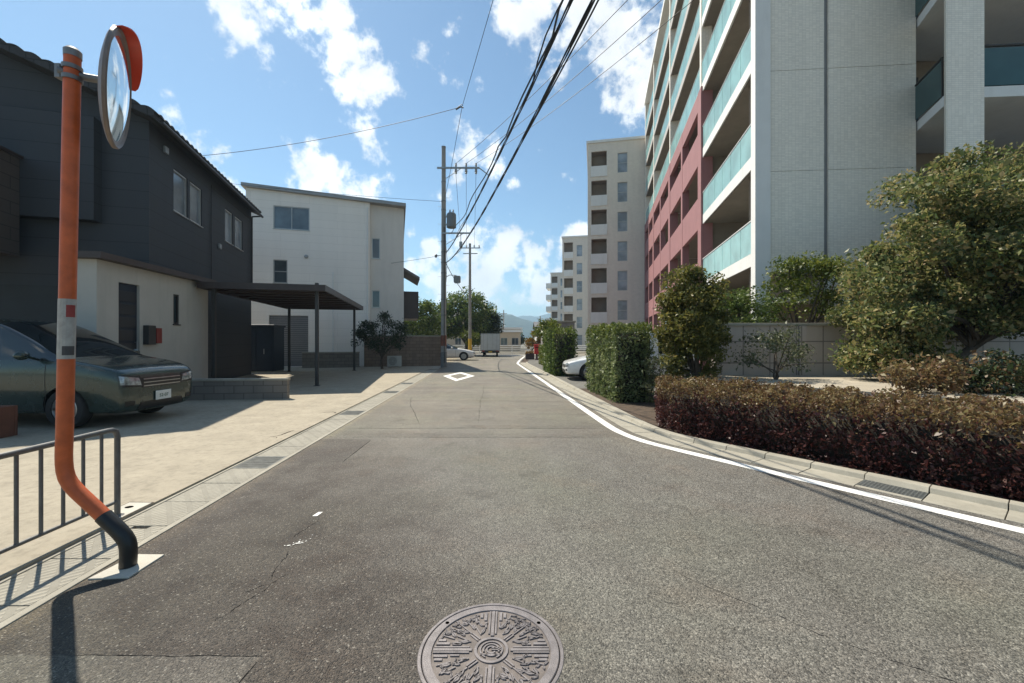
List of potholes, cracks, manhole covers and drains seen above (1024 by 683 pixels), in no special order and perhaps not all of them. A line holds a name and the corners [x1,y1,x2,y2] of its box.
crack [217,521,318,619]
manhole cover [417,603,564,683]
drain grate [234,456,287,468]
drain grate [857,479,928,501]
